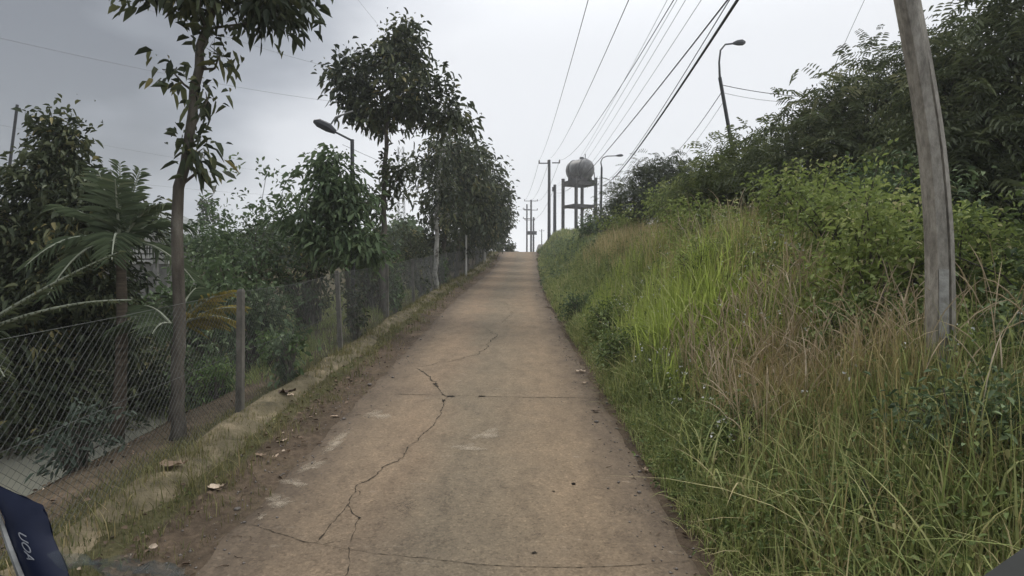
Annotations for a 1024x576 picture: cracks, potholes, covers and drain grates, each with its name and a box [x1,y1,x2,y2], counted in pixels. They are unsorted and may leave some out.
crack [319,308,512,576]
